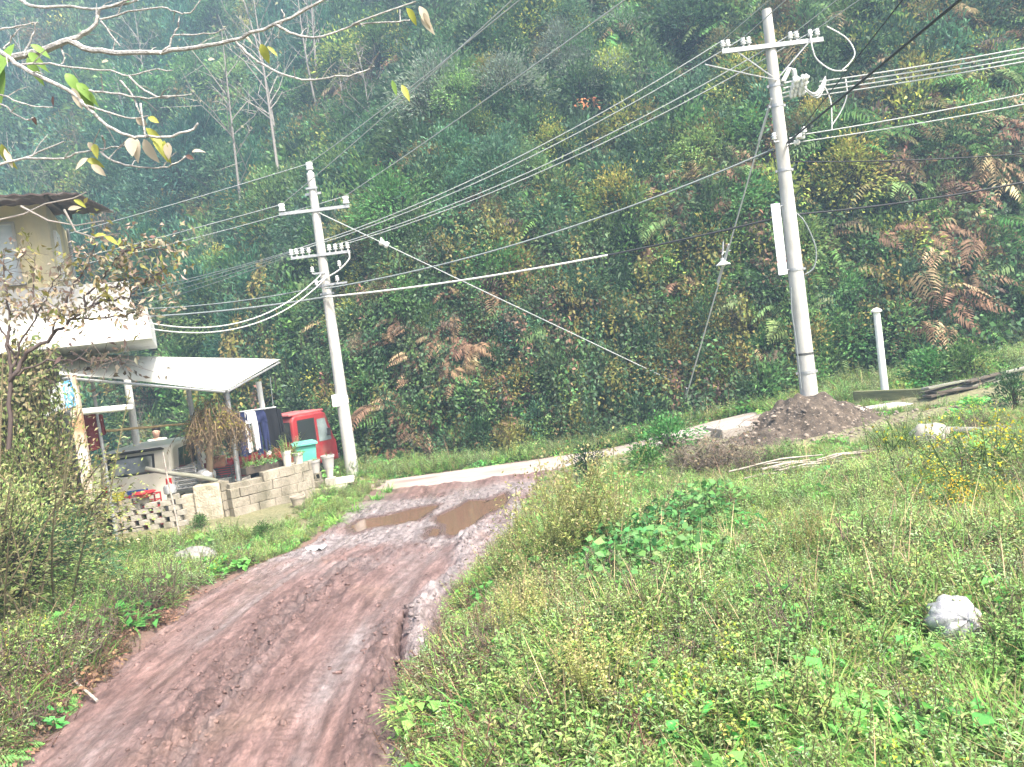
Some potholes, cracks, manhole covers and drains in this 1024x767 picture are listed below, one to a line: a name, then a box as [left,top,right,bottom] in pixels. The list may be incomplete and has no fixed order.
pothole [346,504,442,534]
pothole [432,492,510,538]
